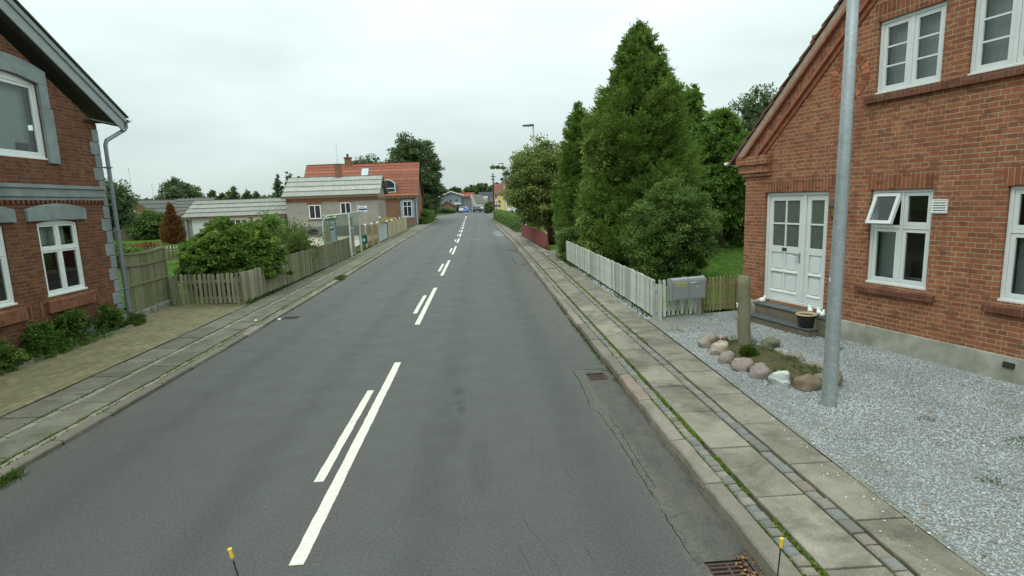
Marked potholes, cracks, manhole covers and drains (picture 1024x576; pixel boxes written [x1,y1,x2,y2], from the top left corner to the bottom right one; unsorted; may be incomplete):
drain grate [704,559,758,576]
